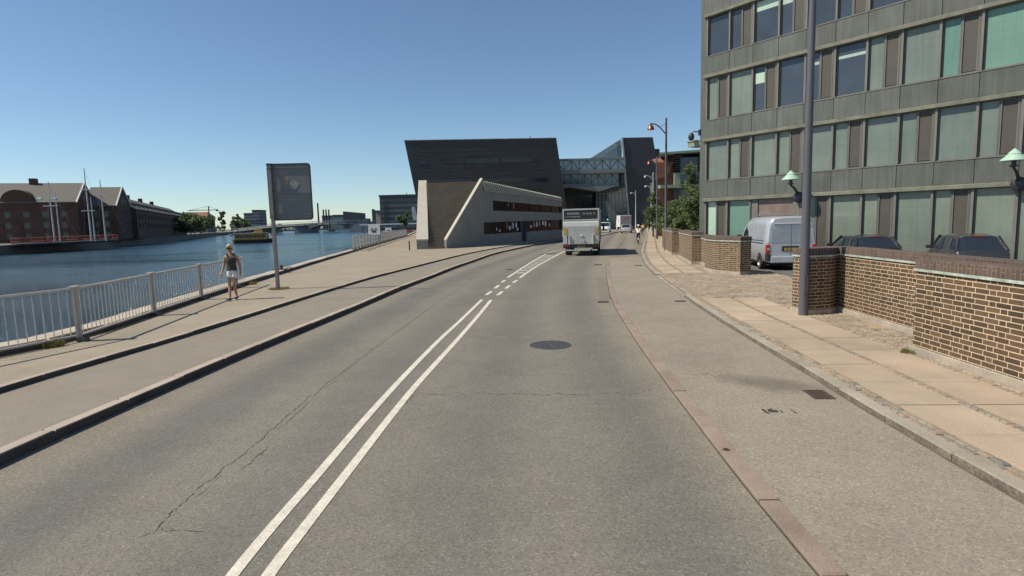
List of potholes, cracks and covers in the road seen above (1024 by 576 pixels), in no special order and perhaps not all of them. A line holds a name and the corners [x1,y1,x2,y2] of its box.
manhole cover [530,341,571,350]
drain grate [802,390,836,399]
crack [146,266,499,535]
